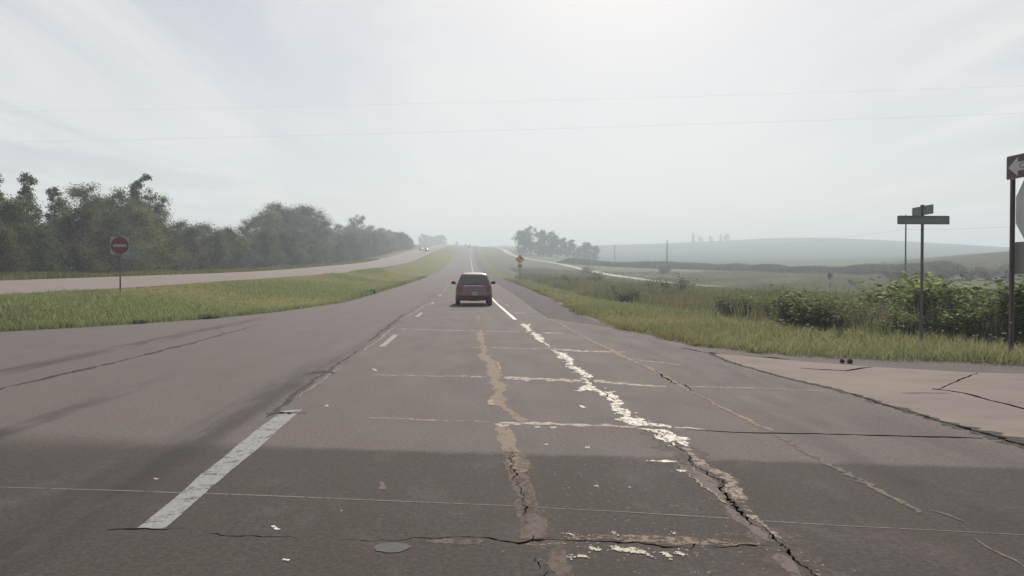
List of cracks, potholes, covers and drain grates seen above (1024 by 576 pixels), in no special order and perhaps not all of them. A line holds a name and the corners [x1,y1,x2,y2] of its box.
crack [6,315,1024,576]
